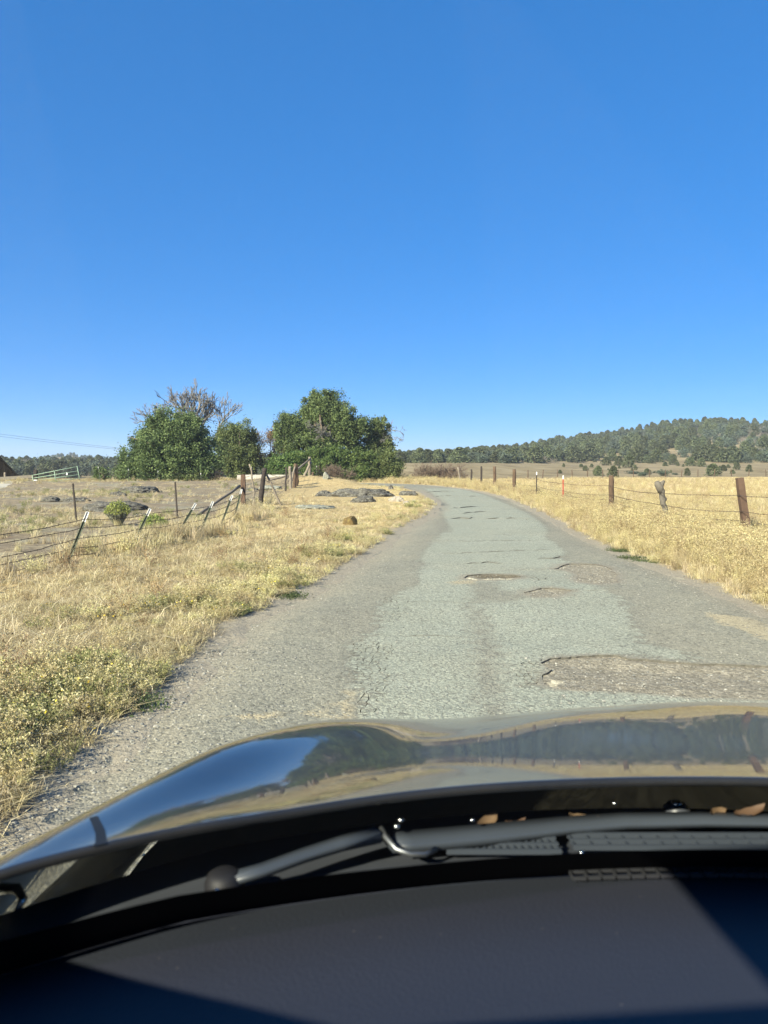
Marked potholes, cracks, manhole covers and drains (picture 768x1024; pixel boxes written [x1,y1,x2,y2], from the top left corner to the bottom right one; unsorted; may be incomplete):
pothole [541,655,768,700]
pothole [555,563,619,583]
crack [347,635,449,716]
pothole [524,588,572,597]
